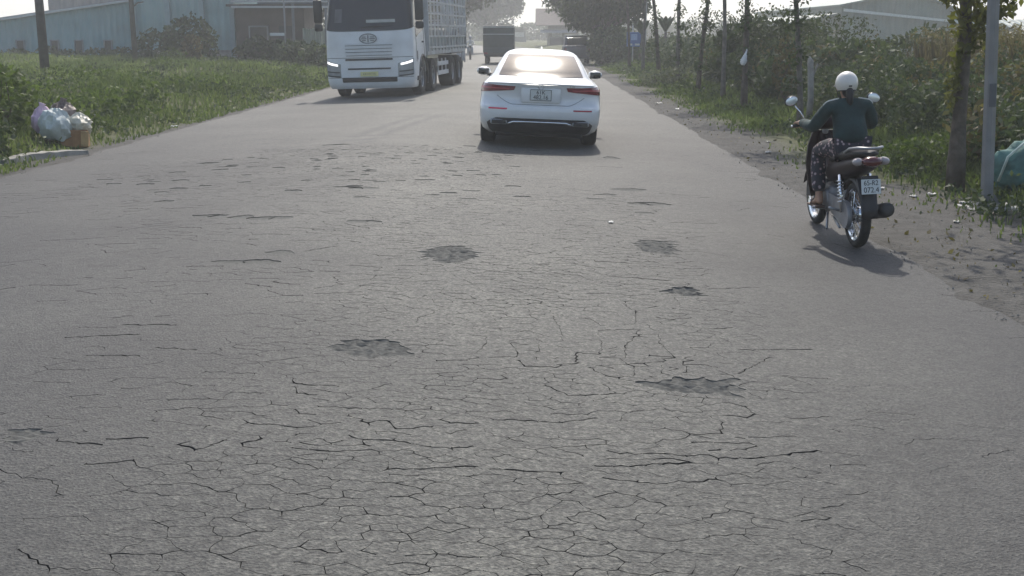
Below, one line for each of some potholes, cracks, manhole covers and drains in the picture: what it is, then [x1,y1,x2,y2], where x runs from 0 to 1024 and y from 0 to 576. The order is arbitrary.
pothole [659,286,708,296]
pothole [417,246,483,263]
pothole [328,339,415,359]
pothole [633,240,680,255]
pothole [635,376,747,398]
crack [0,136,838,406]
crack [0,244,1024,576]
